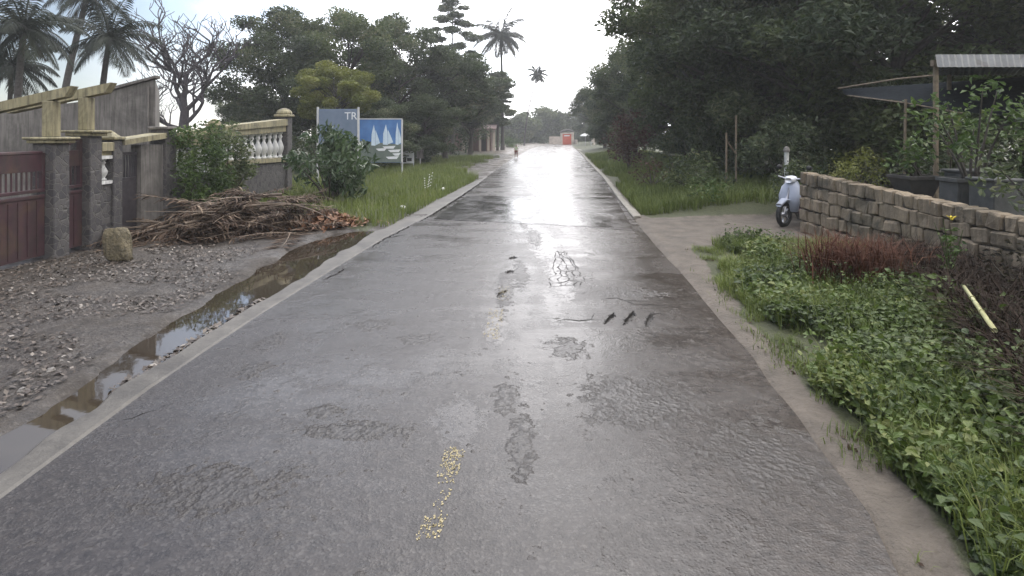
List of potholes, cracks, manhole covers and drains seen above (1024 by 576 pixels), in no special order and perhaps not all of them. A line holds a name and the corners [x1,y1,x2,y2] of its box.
crack [558,296,675,321]
crack [549,251,585,287]
